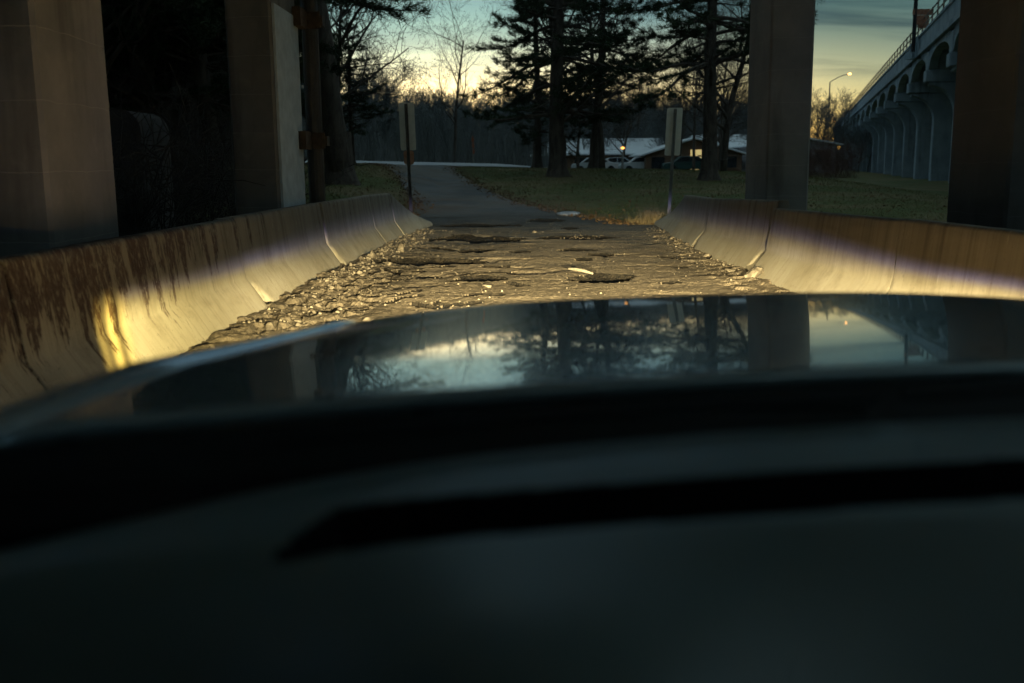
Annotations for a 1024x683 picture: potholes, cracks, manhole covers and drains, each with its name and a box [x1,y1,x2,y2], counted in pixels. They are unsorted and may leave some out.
crack [657,256,713,268]
crack [243,247,531,340]
pothole [370,257,489,266]
pothole [566,273,637,284]
pothole [426,234,528,244]
